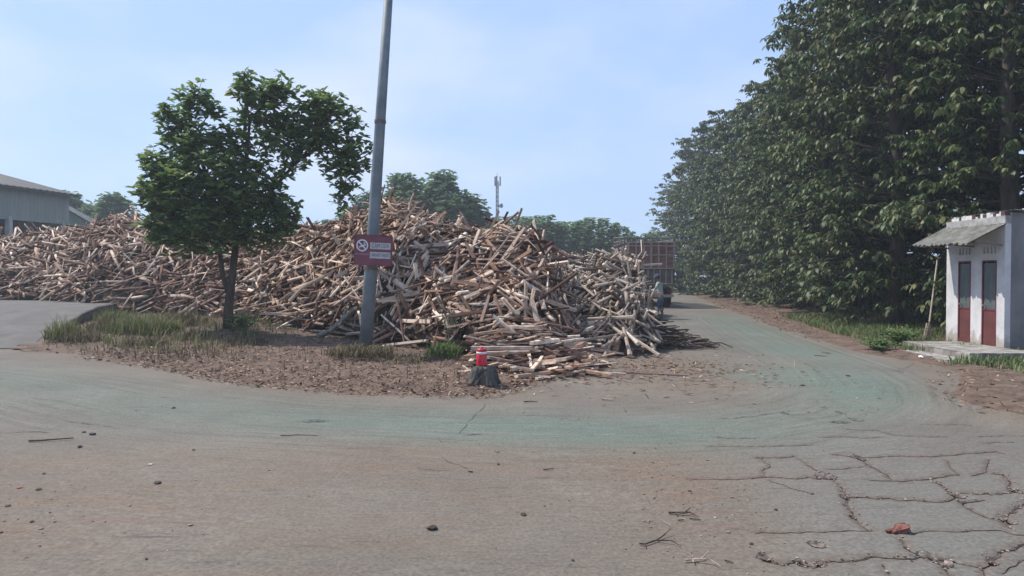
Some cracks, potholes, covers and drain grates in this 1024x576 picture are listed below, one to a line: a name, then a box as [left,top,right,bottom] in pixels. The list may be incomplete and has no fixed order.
crack [708,424,1024,576]
